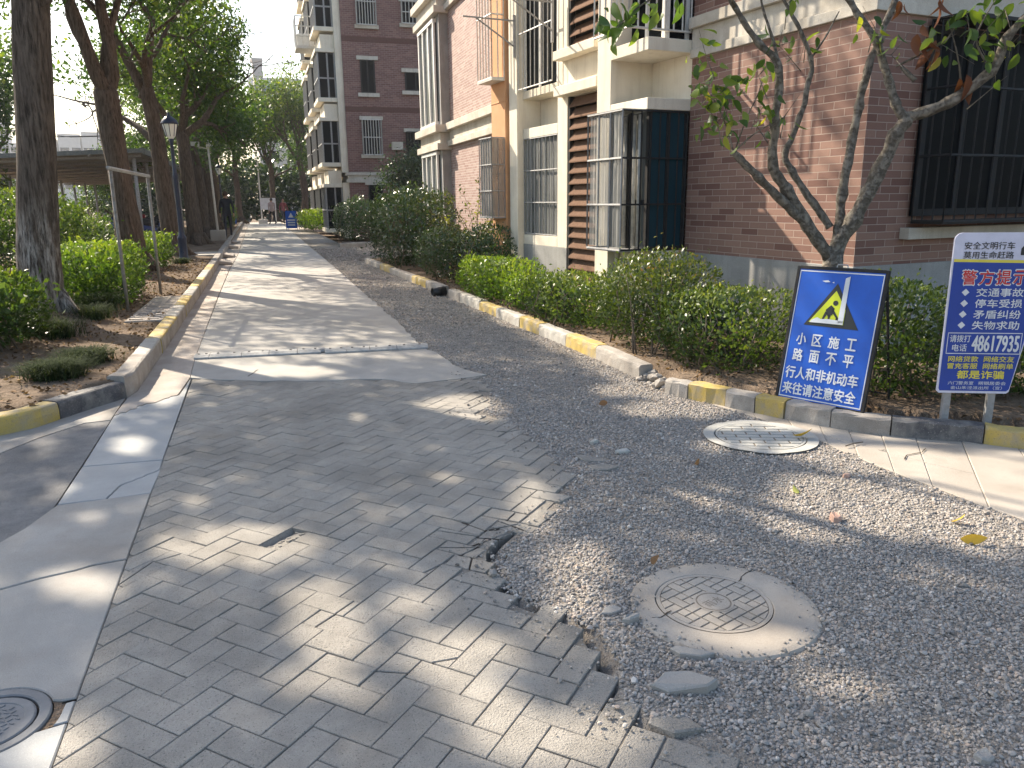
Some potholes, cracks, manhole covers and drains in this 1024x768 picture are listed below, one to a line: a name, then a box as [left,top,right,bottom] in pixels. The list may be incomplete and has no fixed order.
pothole [259,528,306,550]
manhole cover [630,563,822,662]
manhole cover [0,689,66,753]
manhole cover [703,420,819,454]
